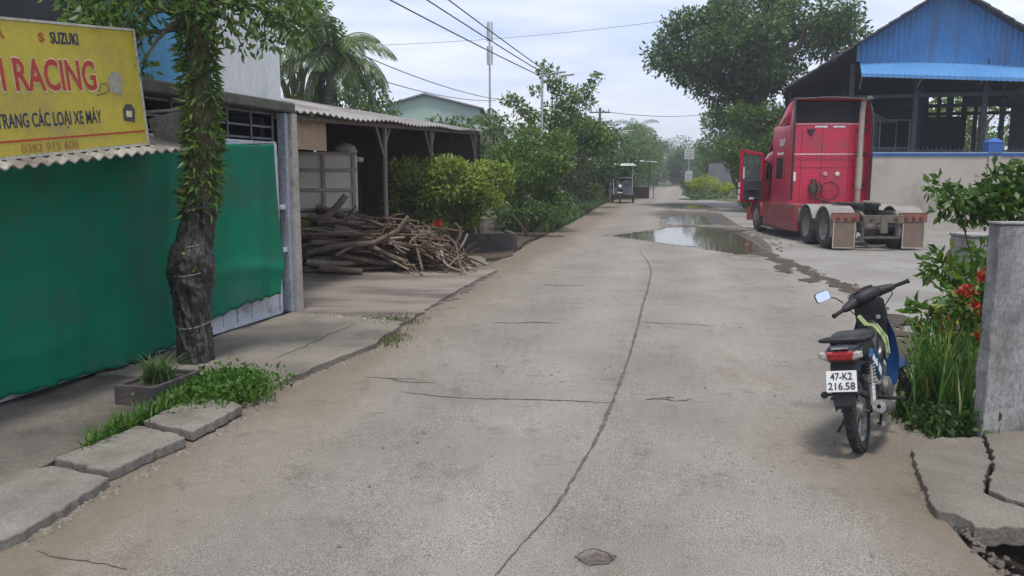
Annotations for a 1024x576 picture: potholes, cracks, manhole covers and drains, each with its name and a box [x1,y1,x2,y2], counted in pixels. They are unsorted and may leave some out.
crack [37,550,125,569]
crack [369,250,708,575]
crack [271,325,376,390]
